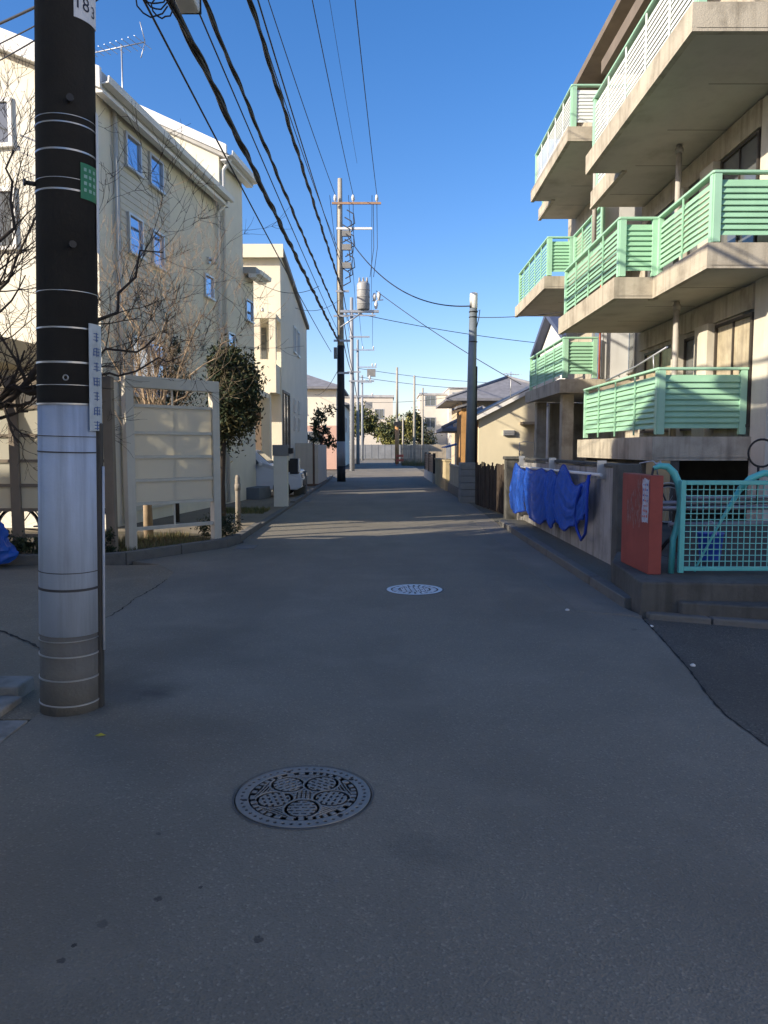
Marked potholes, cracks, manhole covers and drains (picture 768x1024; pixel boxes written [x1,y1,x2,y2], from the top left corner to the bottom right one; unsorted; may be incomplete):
manhole cover [232,765,374,829]
crack [0,630,39,648]
manhole cover [385,584,444,595]
